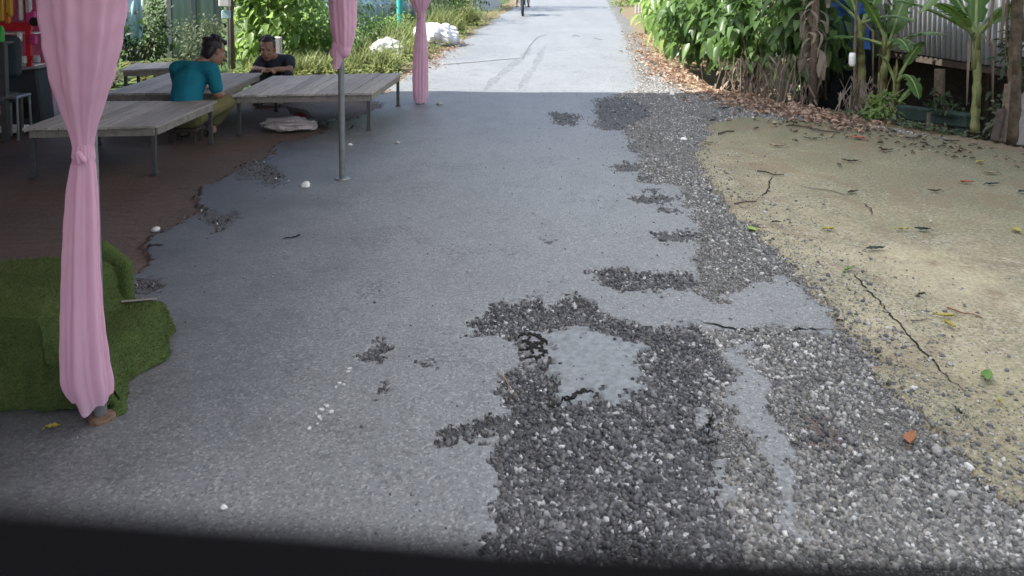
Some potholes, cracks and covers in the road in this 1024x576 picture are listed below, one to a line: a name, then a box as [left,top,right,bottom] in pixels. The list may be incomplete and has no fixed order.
pothole [607,161,649,172]
pothole [583,266,699,298]
pothole [434,291,735,552]
pothole [352,337,395,364]
pothole [196,210,244,235]
pothole [590,96,654,131]
pothole [651,228,702,246]
crack [527,388,594,410]
crack [699,319,846,336]
pothole [800,417,846,452]
crack [513,331,548,361]
pothole [547,111,589,127]
